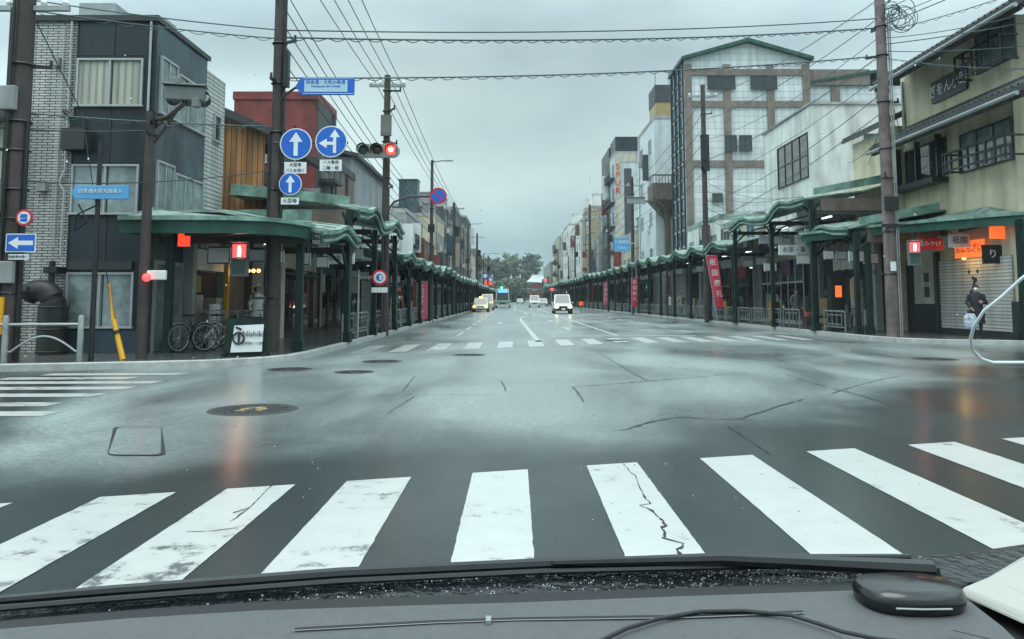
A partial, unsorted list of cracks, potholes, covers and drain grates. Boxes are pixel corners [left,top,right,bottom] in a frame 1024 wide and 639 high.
crack [622,462,684,554]
crack [211,483,274,531]
manhole cover [108,427,166,455]
manhole cover [206,403,298,416]
